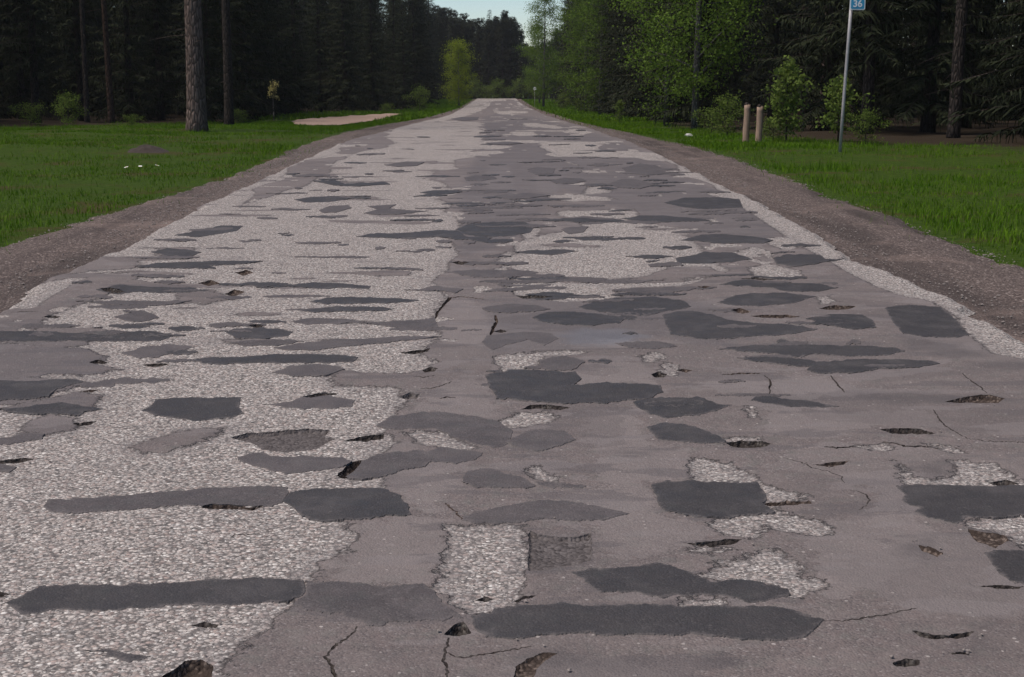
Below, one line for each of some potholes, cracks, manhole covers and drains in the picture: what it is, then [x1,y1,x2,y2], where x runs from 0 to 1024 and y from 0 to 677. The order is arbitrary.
crack [323,626,358,677]
pothole [337,460,362,479]
pothole [444,621,471,636]
crack [884,410,1019,449]
pothole [162,659,214,677]
crack [441,638,531,677]
pothole [726,440,771,448]
pothole [946,395,1005,403]
pothole [514,652,556,677]
crack [826,608,917,622]
